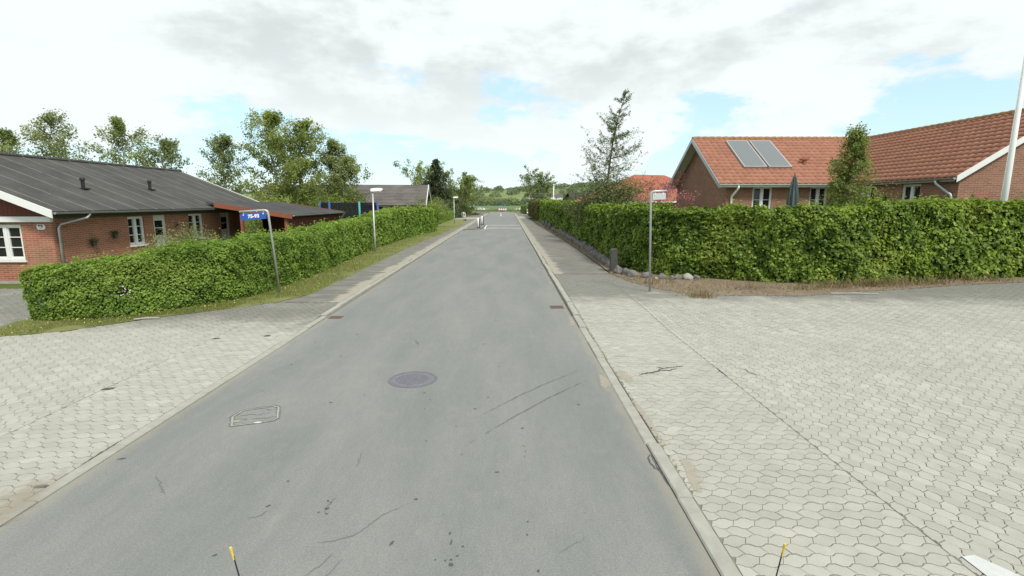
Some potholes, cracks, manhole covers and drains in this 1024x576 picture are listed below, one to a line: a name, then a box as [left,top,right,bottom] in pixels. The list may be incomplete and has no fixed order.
manhole cover [388,371,437,388]
crack [306,506,401,576]
manhole cover [229,405,281,427]
